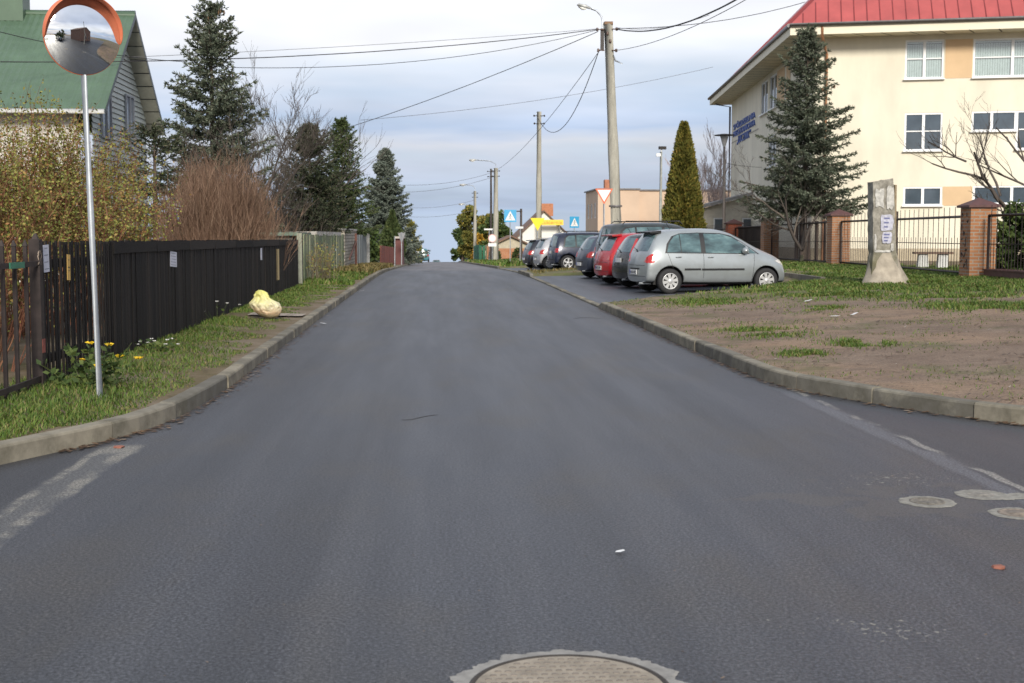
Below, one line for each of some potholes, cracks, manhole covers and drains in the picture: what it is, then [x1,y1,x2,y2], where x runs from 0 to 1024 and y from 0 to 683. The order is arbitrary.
utility cover [987,507,1024,520]
utility cover [955,489,1024,500]
utility cover [898,496,957,508]
manhole cover [450,649,686,683]
